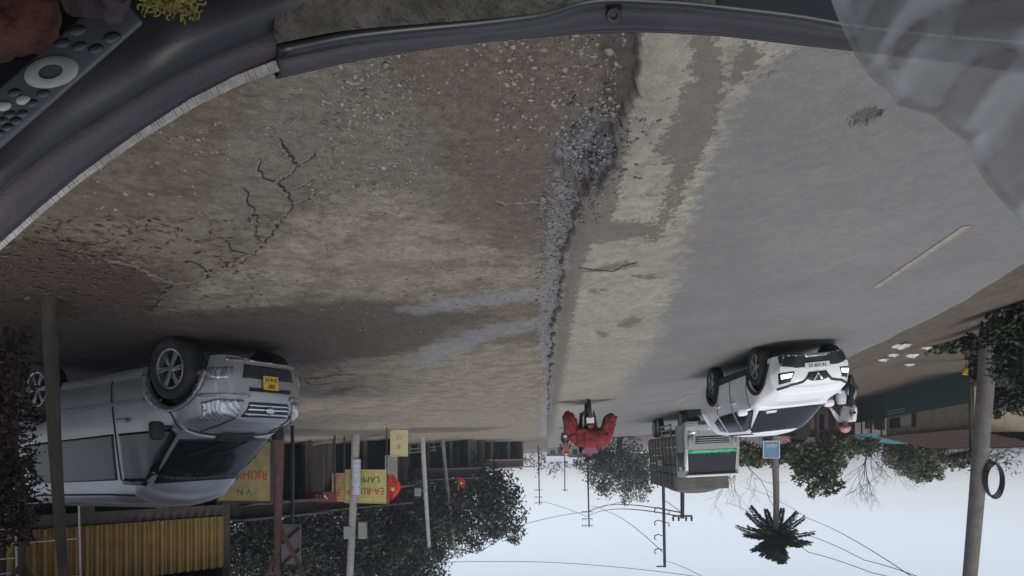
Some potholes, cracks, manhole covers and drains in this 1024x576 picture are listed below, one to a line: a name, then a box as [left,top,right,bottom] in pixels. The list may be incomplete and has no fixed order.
pothole [847,106,886,128]
pothole [546,108,623,199]
crack [103,139,324,311]
